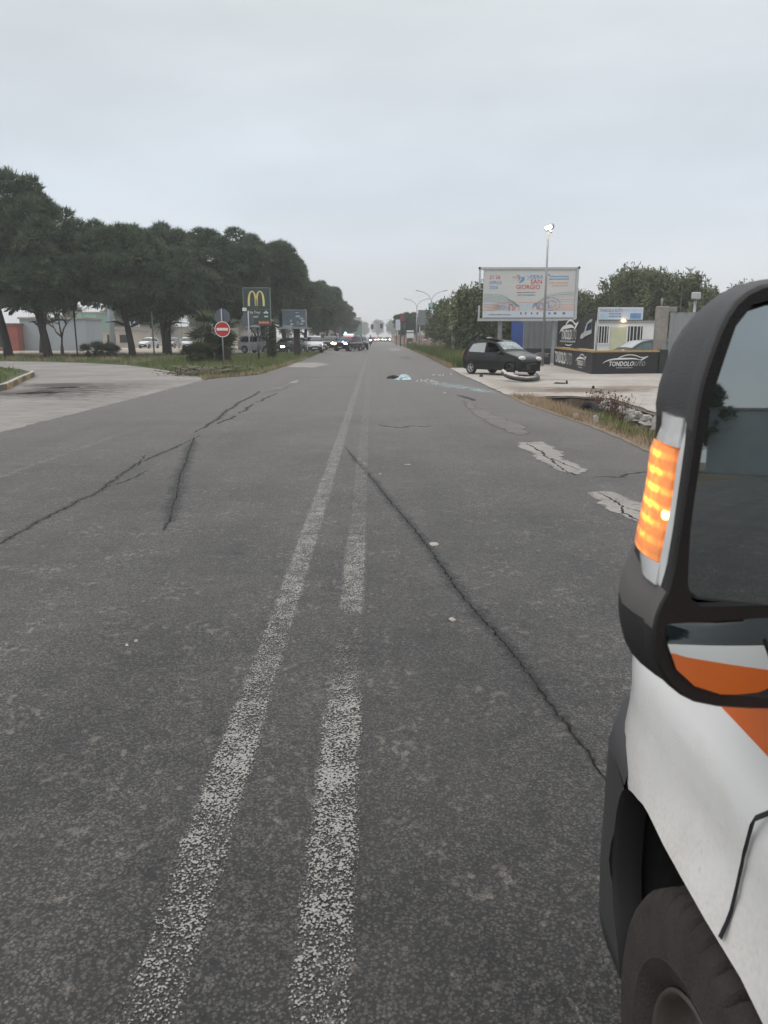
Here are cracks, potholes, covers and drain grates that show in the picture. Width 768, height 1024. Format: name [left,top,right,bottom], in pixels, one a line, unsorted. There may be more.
crack [598,472,642,521]
crack [350,454,606,780]
crack [0,392,277,544]
crack [527,444,579,475]
